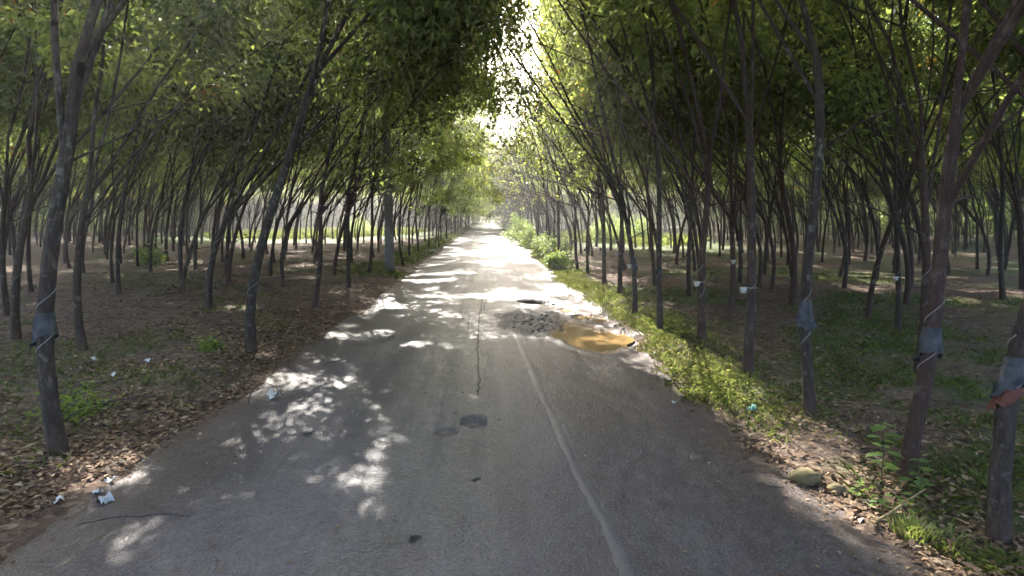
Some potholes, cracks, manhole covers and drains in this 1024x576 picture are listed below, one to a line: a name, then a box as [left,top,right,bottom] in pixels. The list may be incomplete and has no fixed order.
crack [467,293,487,395]
pothole [546,321,634,354]
pothole [494,308,568,338]
pothole [573,314,607,323]
